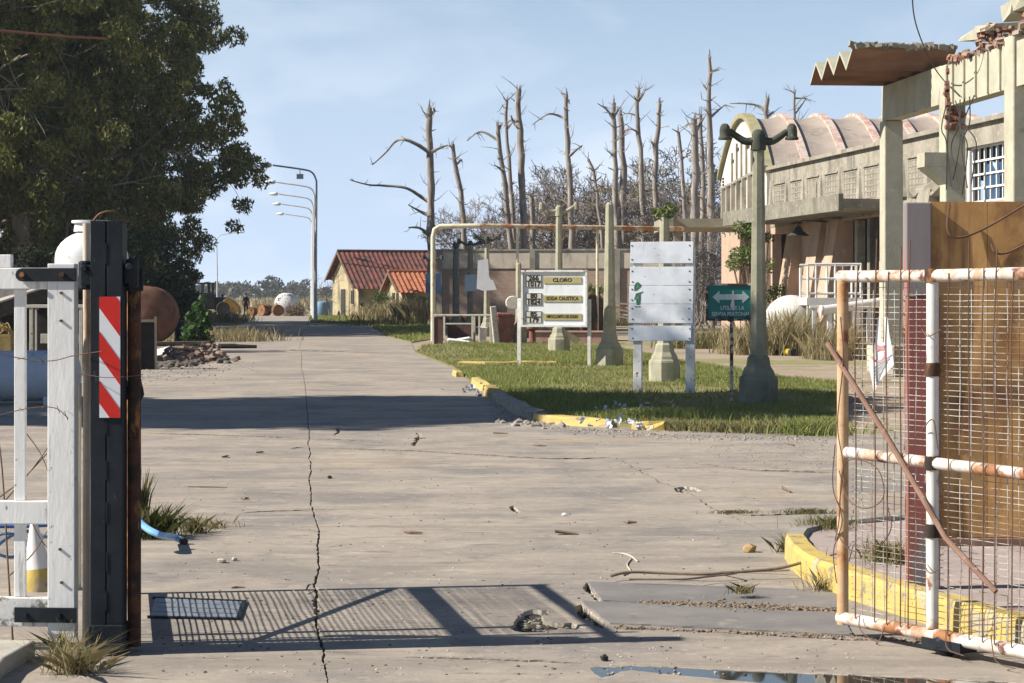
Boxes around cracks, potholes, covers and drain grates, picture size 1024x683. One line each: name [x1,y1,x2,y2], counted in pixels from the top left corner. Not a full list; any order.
pothole [510,609,585,633]
crack [142,333,837,683]
